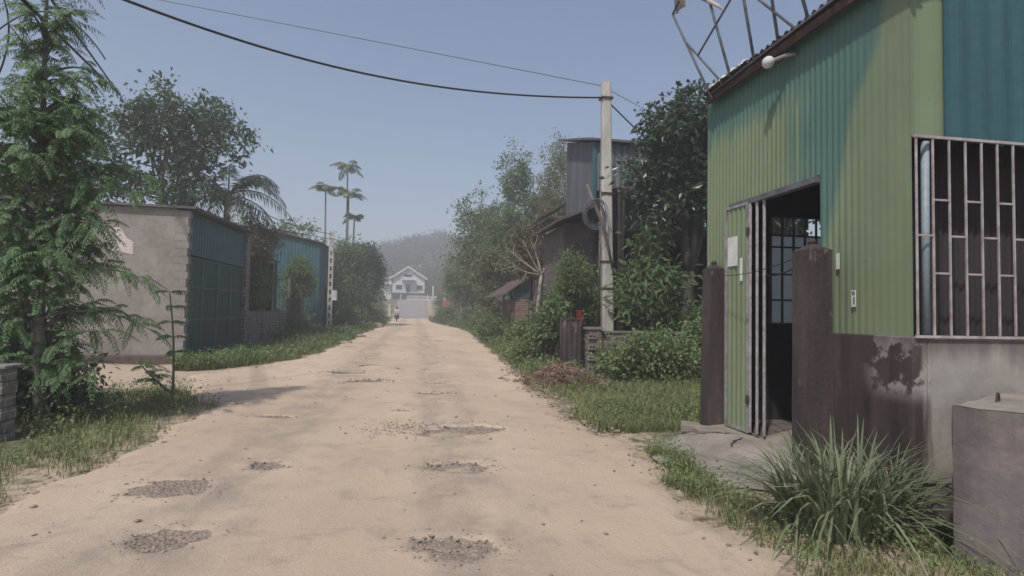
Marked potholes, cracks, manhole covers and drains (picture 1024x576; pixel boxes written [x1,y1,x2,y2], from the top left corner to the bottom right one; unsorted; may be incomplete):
pothole [382,526,526,573]
pothole [403,457,507,477]
pothole [91,520,240,564]
pothole [399,421,526,440]
pothole [95,474,234,506]
pothole [232,456,304,476]
